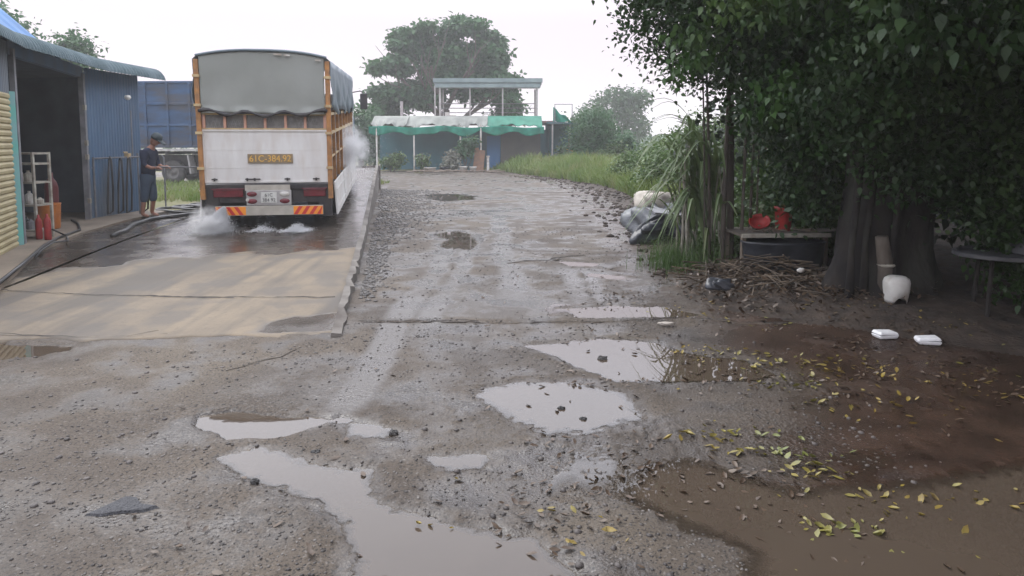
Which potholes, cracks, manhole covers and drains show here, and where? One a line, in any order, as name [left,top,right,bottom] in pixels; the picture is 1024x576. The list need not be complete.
pothole [423,228,487,252]
pothole [328,412,411,448]
crack [226,347,301,371]
pothole [204,439,597,576]
pothole [562,304,708,320]
pothole [418,193,481,201]
pothole [468,379,656,439]
pothole [519,336,785,385]
pothole [621,456,1024,576]
pothole [177,404,356,446]
